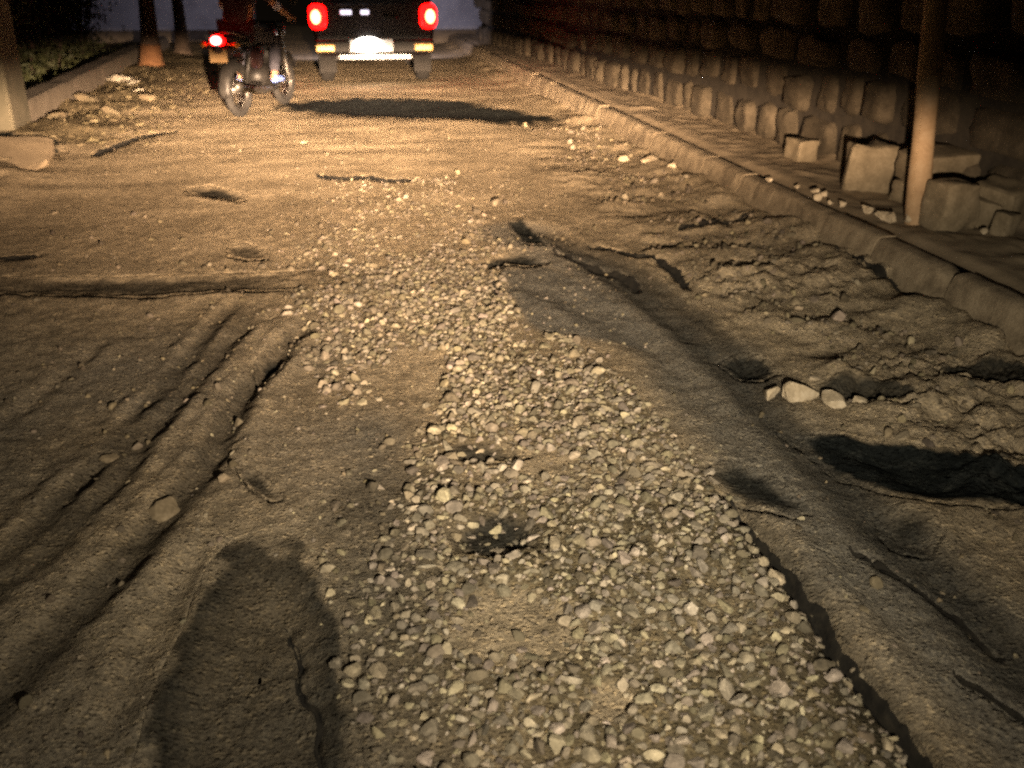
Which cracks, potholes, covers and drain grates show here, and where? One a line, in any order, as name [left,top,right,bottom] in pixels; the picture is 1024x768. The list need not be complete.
crack [316,174,419,182]
crack [834,246,1005,336]
pothole [183,185,250,202]
crack [92,130,178,156]
crack [553,245,691,294]
crack [286,629,324,768]
crack [673,211,755,230]
crack [730,500,1024,768]
pothole [436,503,560,561]
